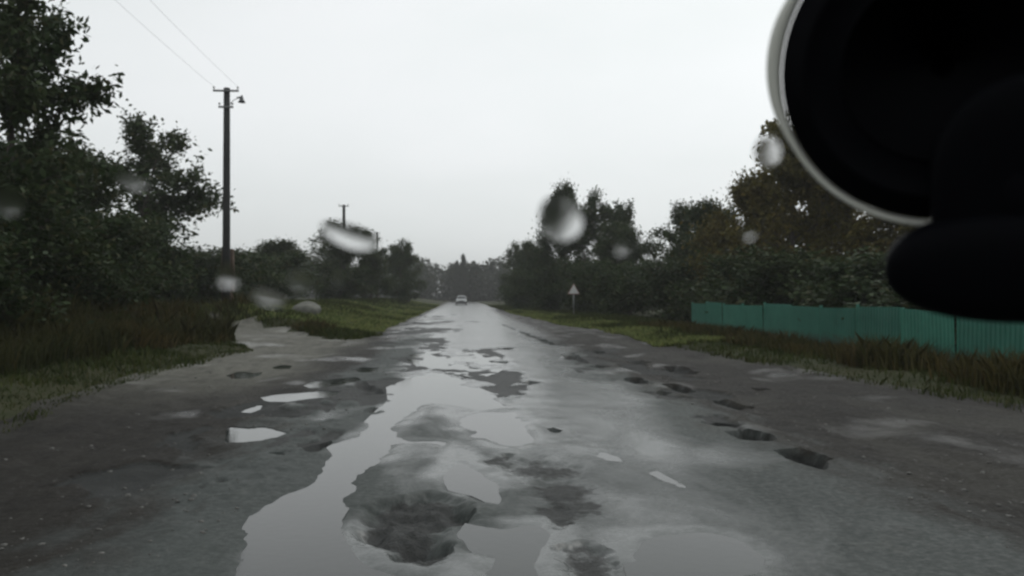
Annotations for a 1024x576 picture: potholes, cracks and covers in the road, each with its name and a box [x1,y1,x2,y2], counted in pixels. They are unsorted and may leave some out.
pothole [225,426,289,442]
pothole [712,399,755,411]
pothole [342,489,484,567]
pothole [226,370,264,379]
pothole [772,446,834,470]
pothole [660,365,700,376]
pothole [723,429,777,442]
pothole [549,539,625,576]
pothole [662,383,697,394]
